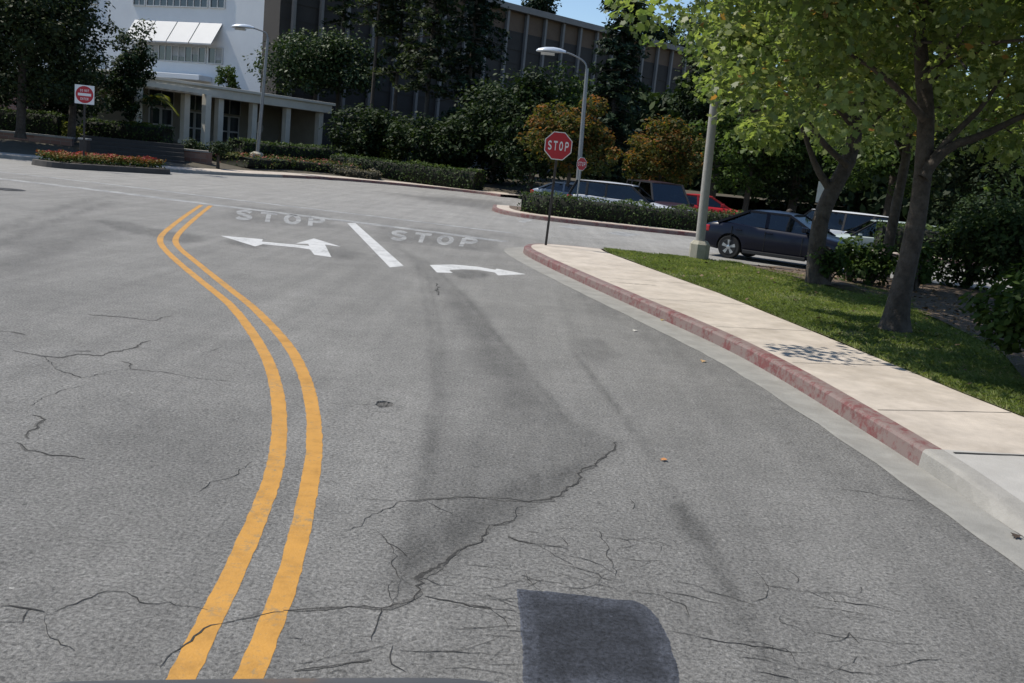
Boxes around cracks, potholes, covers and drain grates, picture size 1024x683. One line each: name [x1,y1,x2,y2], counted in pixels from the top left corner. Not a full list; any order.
crack [4,331,234,459]
crack [2,590,208,649]
pothole [363,397,405,412]
crack [160,442,973,680]
